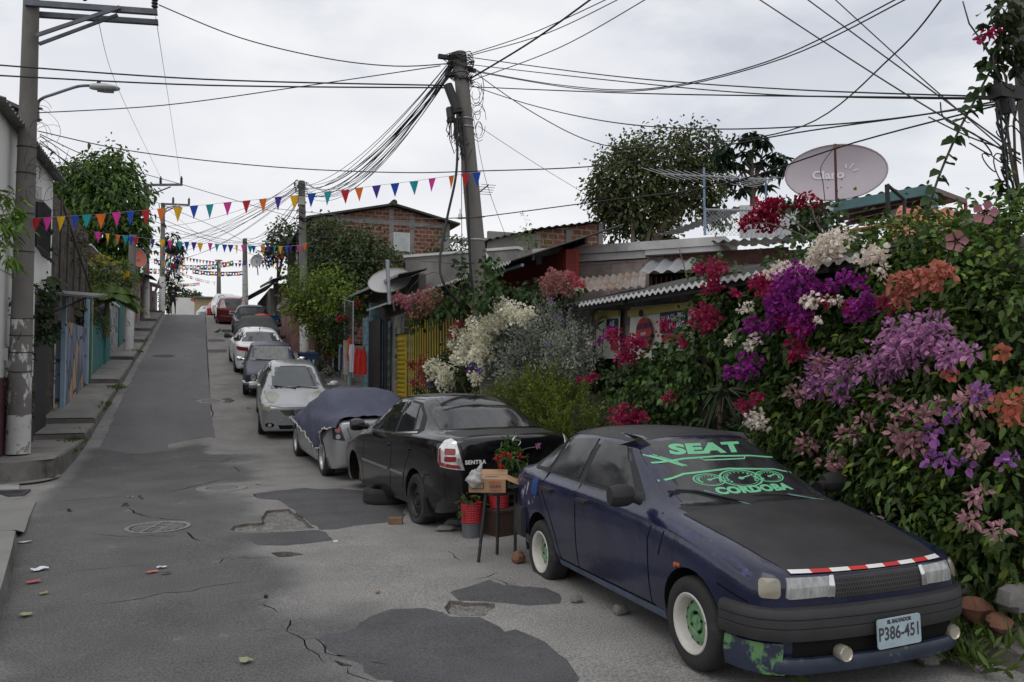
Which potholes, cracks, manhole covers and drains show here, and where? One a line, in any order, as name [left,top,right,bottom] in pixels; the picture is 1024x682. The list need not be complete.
pothole [229,509,314,533]
crack [41,496,200,541]
manhole cover [124,521,191,534]
crack [95,580,250,605]
crack [255,605,375,682]
drain grate [0,489,31,497]
pothole [444,600,495,616]
